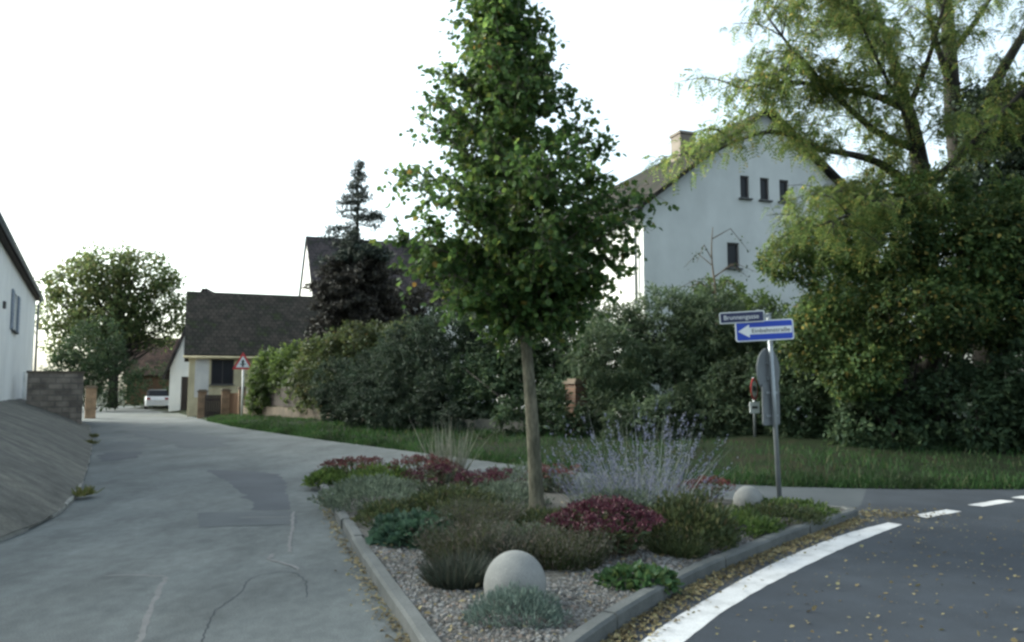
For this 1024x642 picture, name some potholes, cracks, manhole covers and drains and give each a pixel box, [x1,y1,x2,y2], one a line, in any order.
crack [201,511,308,642]
crack [104,574,168,642]
